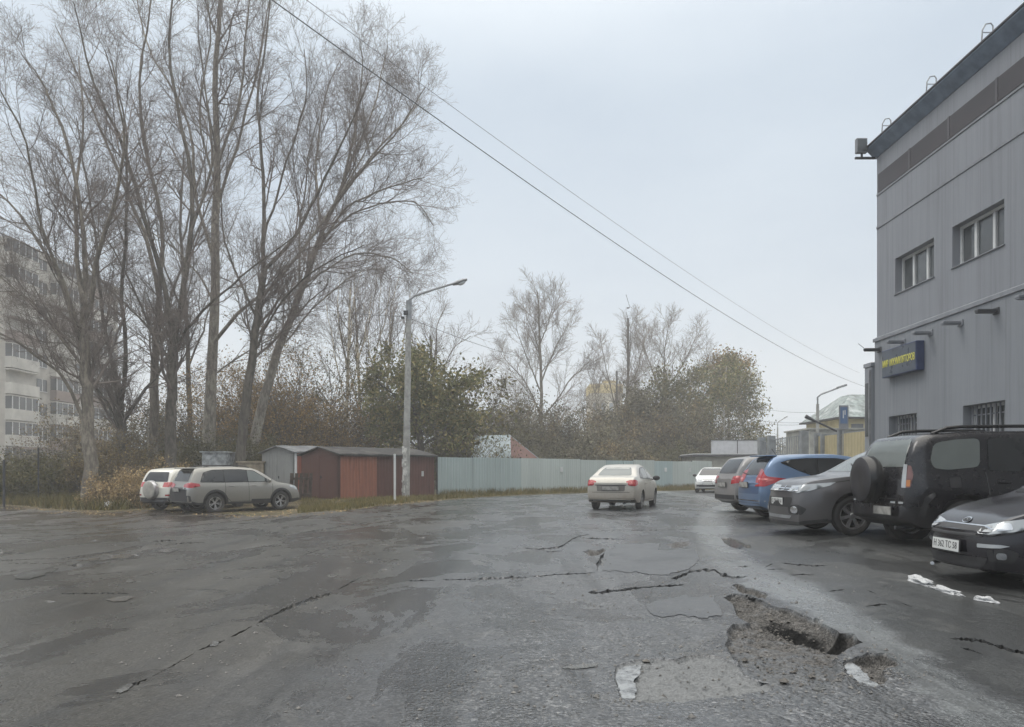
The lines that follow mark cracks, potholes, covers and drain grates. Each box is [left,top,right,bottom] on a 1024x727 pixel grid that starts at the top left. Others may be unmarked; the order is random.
crack [949,637,1024,655]
pothole [732,583,768,602]
pothole [843,653,901,685]
pothole [723,594,863,688]
crack [409,566,748,594]
crack [132,579,358,686]
crack [525,529,687,552]
